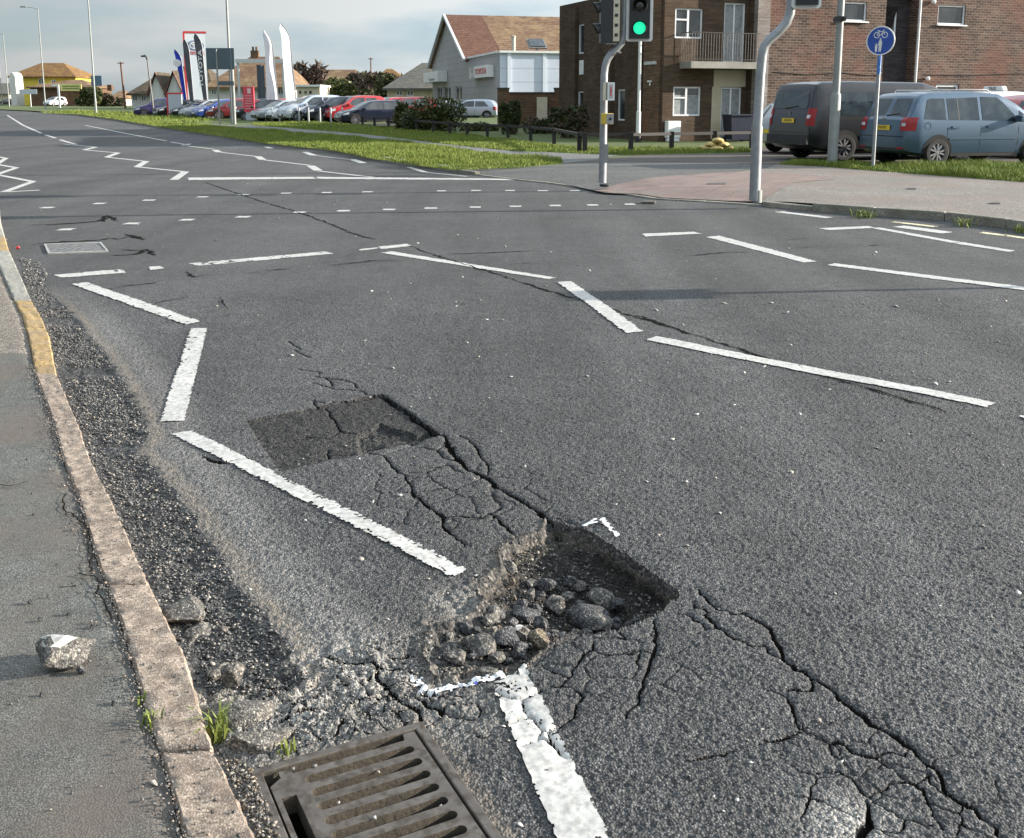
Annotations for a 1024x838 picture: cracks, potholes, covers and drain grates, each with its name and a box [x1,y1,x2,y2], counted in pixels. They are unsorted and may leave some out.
manhole cover [44,242,109,254]
pothole [422,518,680,682]
drain grate [250,722,503,838]
crack [680,591,999,838]
crack [381,435,554,547]
crack [62,493,112,619]
crack [274,376,376,460]
